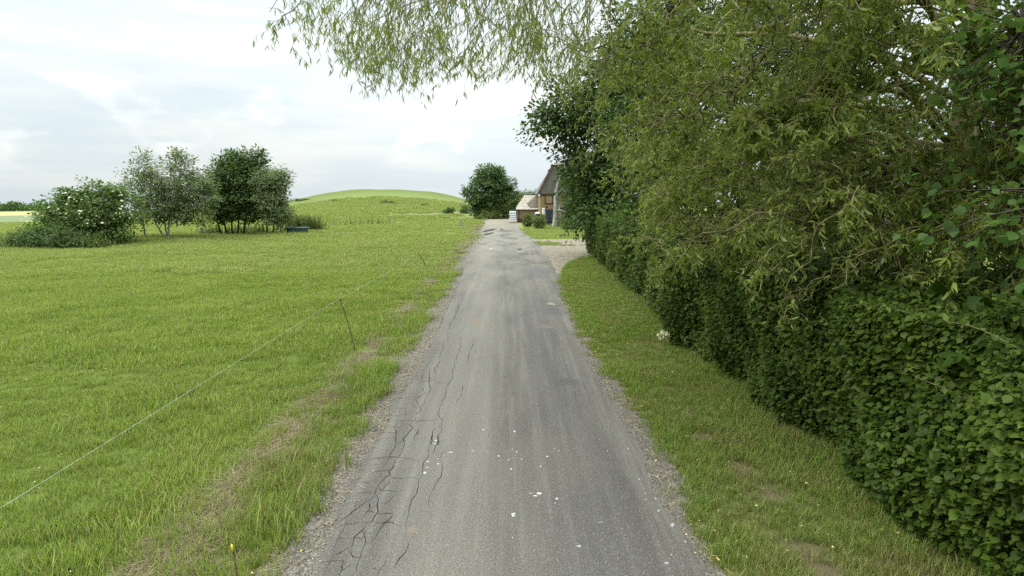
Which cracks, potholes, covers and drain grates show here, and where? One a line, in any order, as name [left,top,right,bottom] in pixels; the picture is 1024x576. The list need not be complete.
crack [322,340,461,575]
